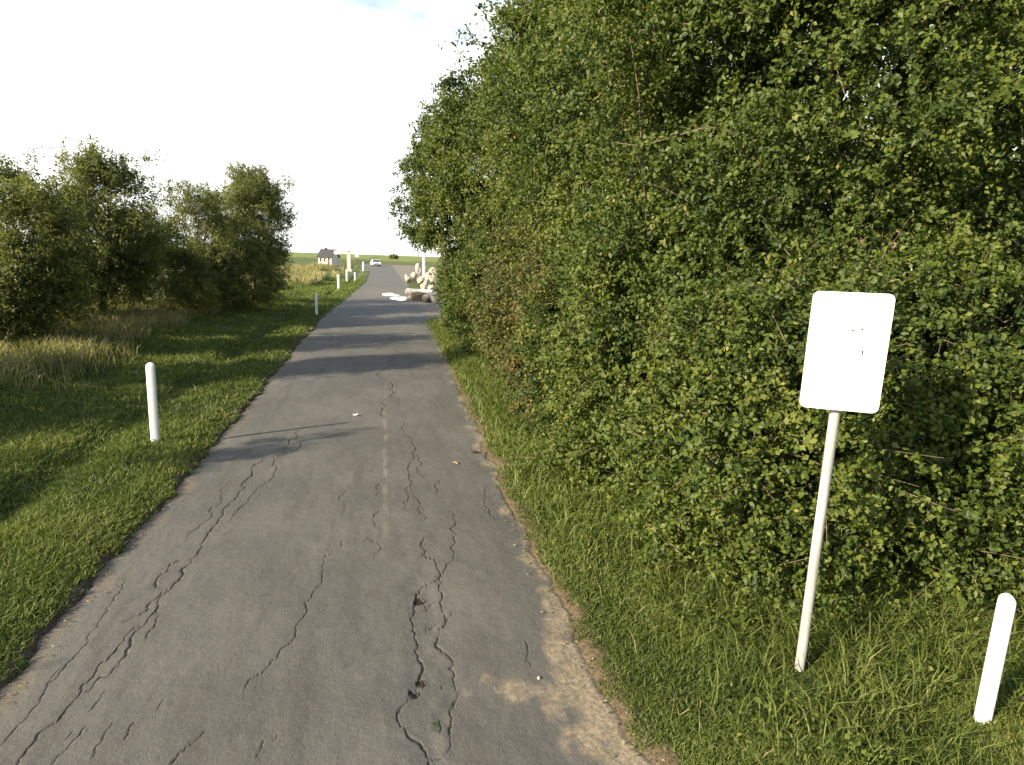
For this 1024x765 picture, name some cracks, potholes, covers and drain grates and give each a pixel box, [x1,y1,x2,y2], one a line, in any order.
crack [402,427,440,520]
crack [0,431,302,765]
crack [396,513,458,765]
crack [243,541,343,698]
